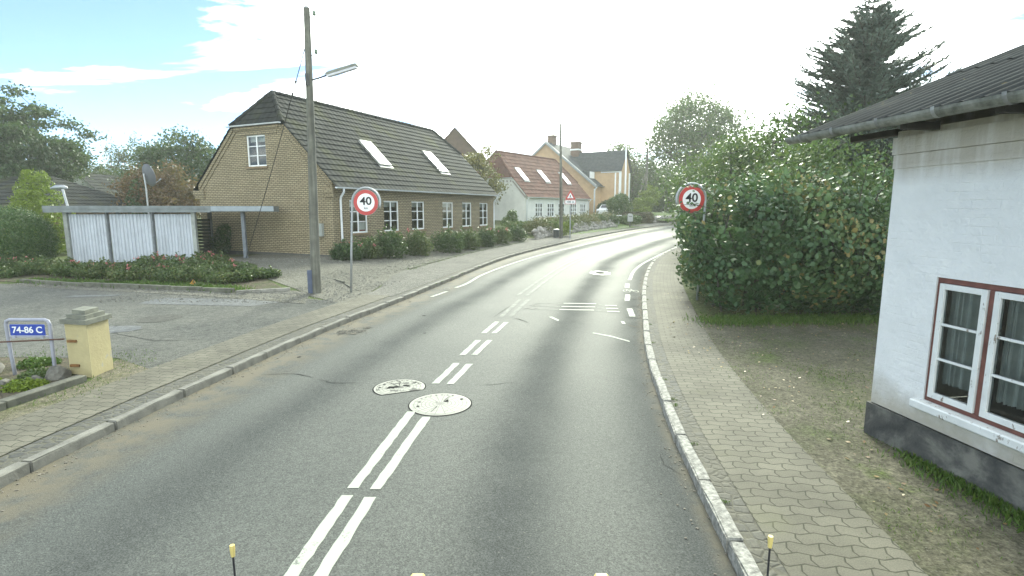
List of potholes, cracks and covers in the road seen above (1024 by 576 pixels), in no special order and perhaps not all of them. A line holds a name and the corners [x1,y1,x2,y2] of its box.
manhole cover [372,379,426,395]
manhole cover [408,393,472,416]
